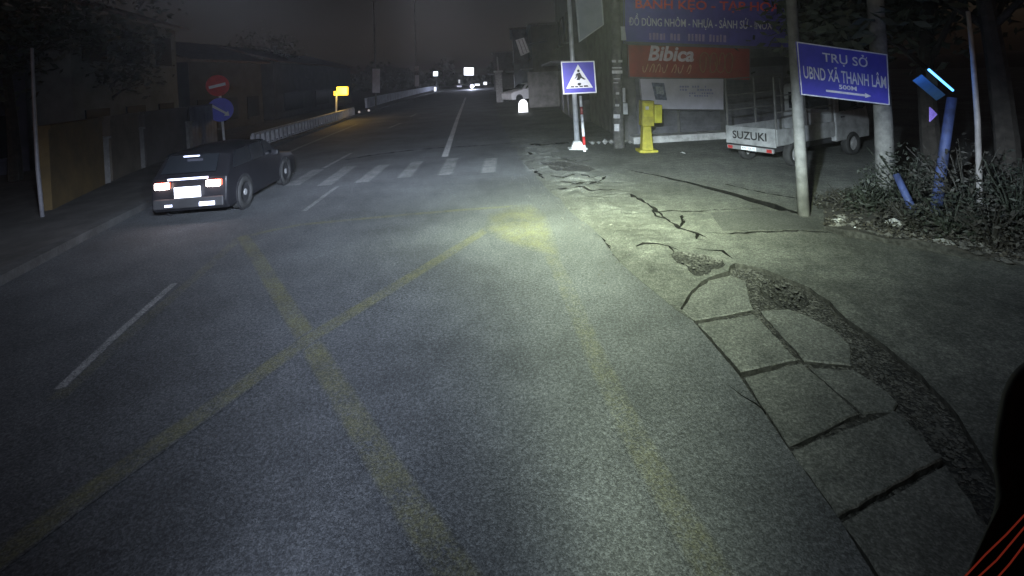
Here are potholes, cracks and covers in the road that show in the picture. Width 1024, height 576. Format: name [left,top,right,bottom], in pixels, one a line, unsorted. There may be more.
pothole [672,252,725,276]
pothole [759,279,809,311]
crack [528,142,832,272]
pothole [541,161,594,171]
